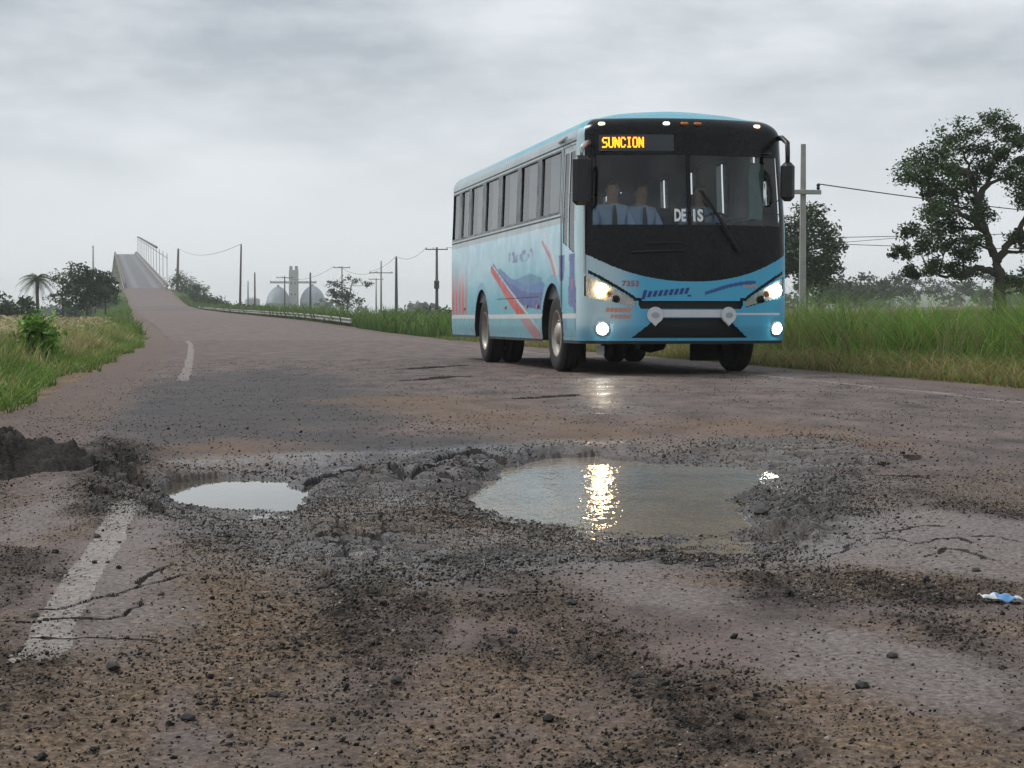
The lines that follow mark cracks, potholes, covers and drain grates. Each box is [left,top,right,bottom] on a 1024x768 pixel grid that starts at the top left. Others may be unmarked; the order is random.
crack [834,525,1021,561]
pothole [448,437,872,555]
pothole [142,467,329,524]
crack [5,563,190,642]
